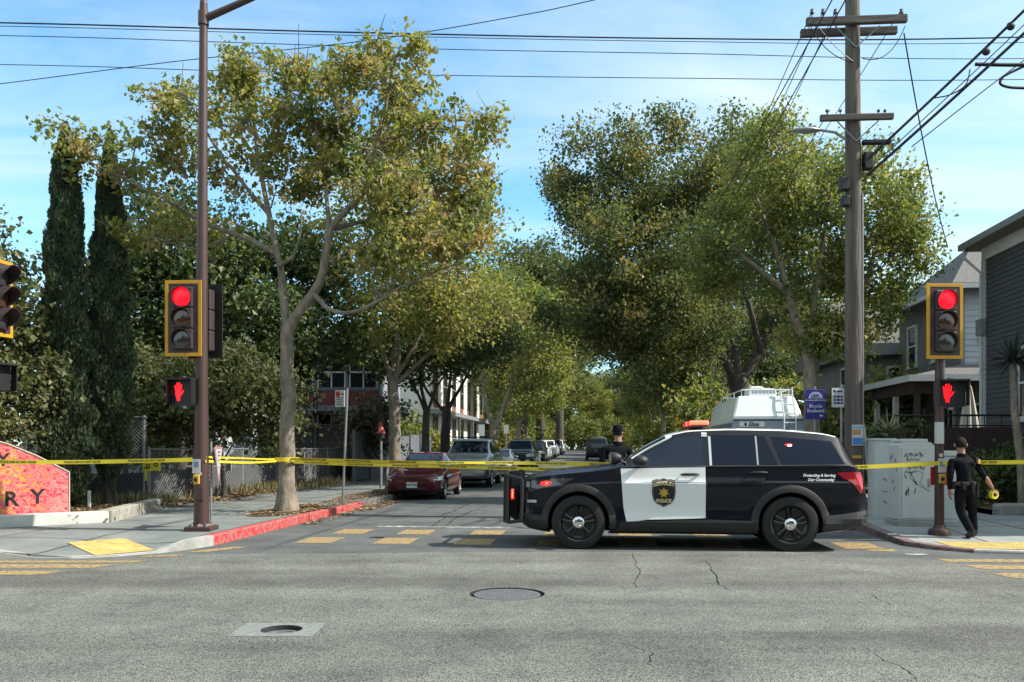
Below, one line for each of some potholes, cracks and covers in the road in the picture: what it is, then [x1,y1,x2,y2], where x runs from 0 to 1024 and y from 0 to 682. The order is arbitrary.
manhole cover [469,588,545,600]
utility cover [228,623,326,636]
